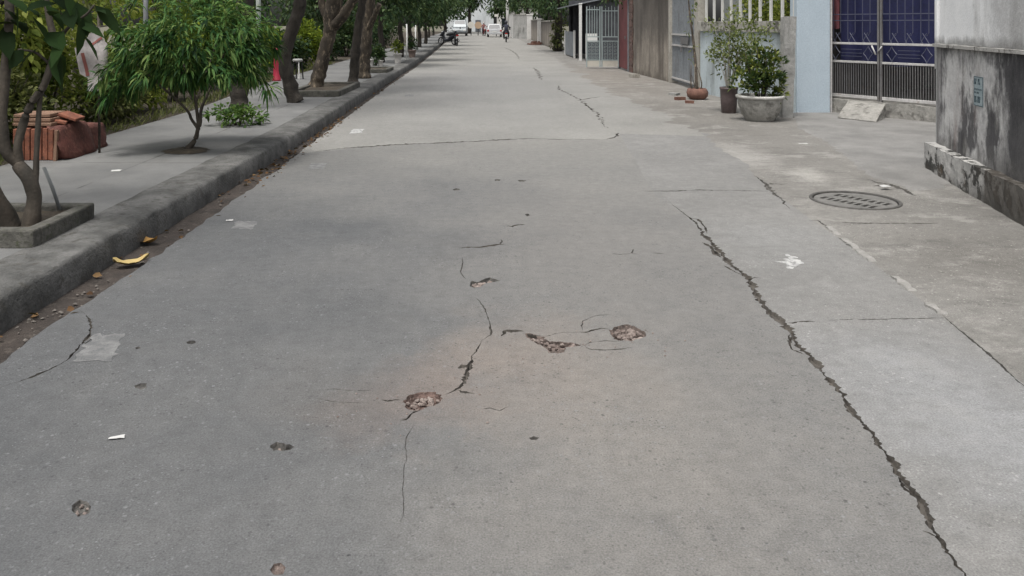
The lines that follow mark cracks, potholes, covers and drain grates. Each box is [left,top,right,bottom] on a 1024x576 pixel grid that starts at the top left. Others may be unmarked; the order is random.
pothole [609,324,646,341]
pothole [270,563,286,575]
crack [310,48,619,153]
crack [673,177,966,576]
pothole [72,500,91,517]
pothole [403,392,443,411]
crack [0,312,93,388]
manhole cover [809,190,903,210]
pothole [526,333,580,354]
crack [448,298,632,411]
pothole [270,442,294,451]
crack [460,224,524,278]
